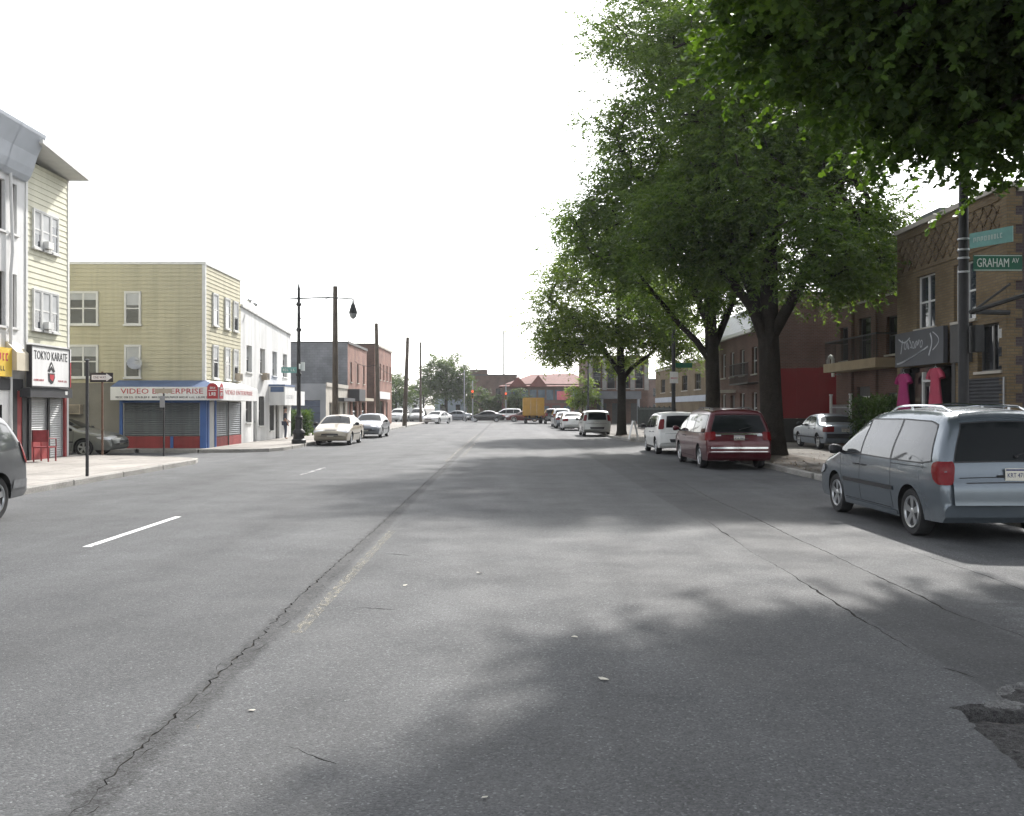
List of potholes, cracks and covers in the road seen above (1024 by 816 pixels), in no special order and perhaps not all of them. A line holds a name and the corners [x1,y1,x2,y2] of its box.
pothole [949,682,1024,770]
crack [706,520,918,652]
